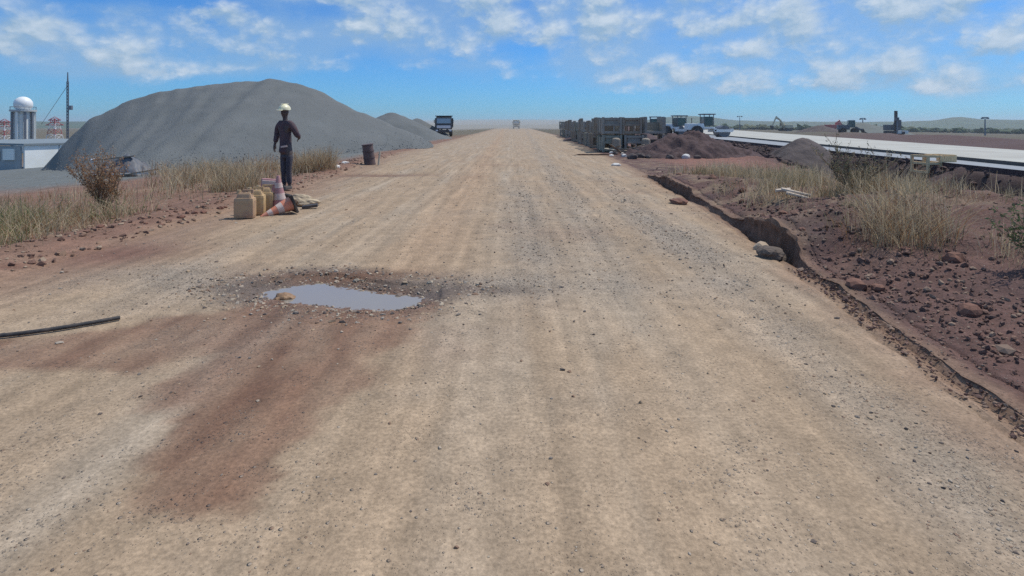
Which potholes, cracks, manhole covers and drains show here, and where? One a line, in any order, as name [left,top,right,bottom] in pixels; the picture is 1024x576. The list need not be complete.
pothole [203,266,481,325]
